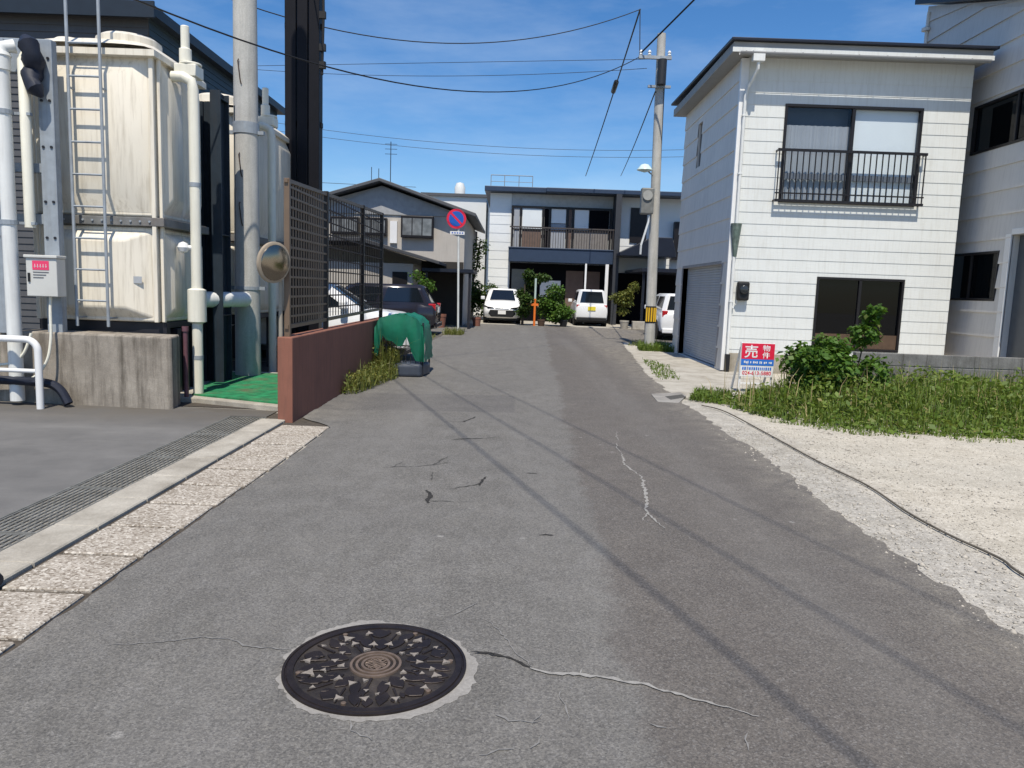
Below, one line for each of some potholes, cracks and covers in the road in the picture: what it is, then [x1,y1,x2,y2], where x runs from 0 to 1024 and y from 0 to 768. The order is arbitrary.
manhole cover [275,620,479,722]
drain grate [0,486,124,534]
drain grate [0,533,34,552]
crack [392,457,487,503]
drain grate [192,416,267,434]
drain grate [141,433,230,457]
crack [108,636,291,649]
drain grate [72,456,185,488]
crack [455,603,757,755]
crack [616,435,665,528]
